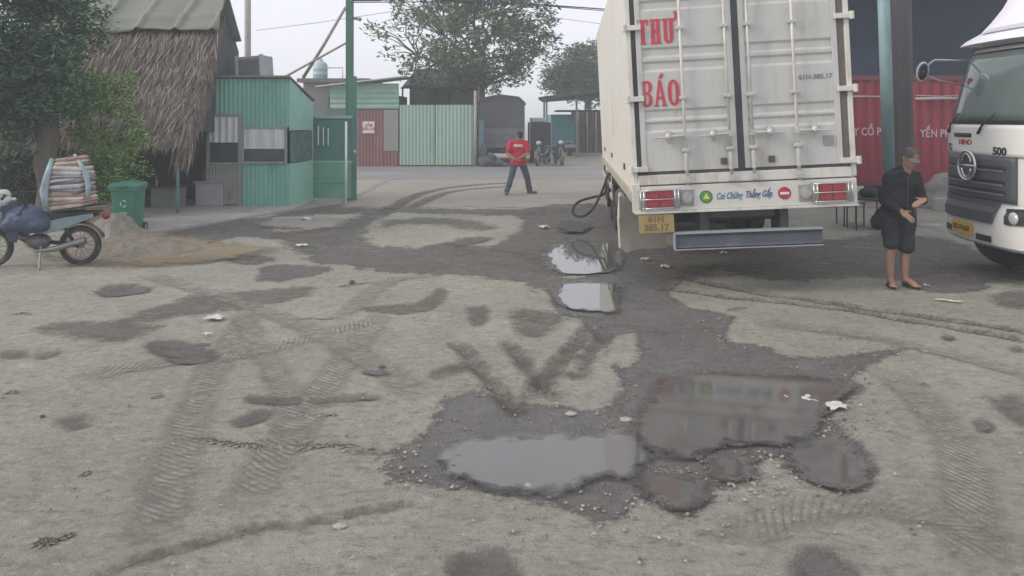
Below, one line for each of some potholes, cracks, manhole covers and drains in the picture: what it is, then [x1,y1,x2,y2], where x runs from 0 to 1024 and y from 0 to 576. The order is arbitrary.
crack [182,436,359,452]
pothole [628,371,854,459]
pothole [548,281,623,313]
pothole [780,430,879,491]
pothole [633,472,713,509]
pothole [543,239,626,275]
pothole [147,339,218,365]
pothole [434,430,653,496]
pothole [557,220,592,234]
pothole [703,451,759,483]
